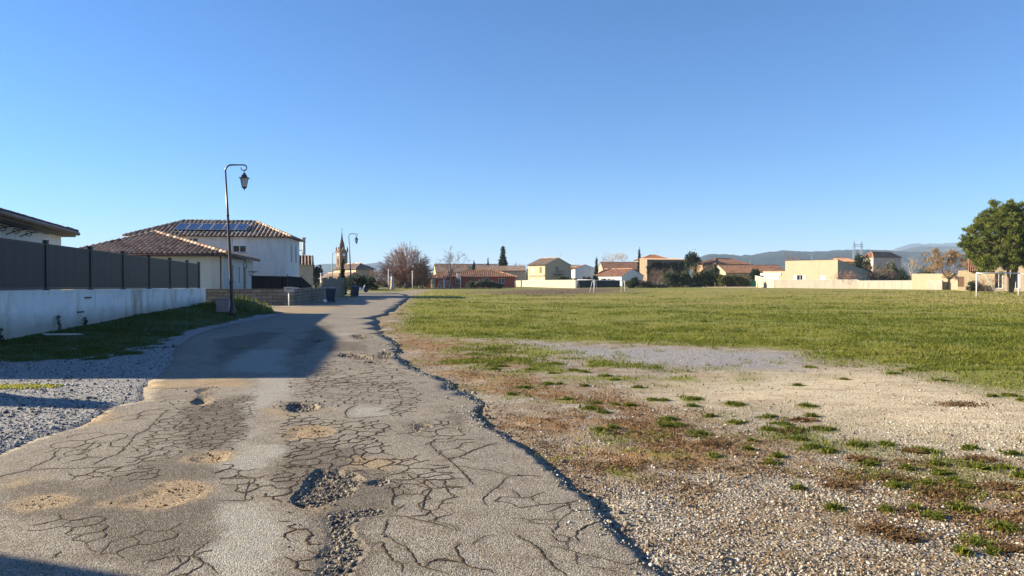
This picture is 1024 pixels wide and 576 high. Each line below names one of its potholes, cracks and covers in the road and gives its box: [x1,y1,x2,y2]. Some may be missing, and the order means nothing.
pothole [287,506,417,576]
crack [2,340,638,576]
pothole [338,352,375,360]
pothole [272,400,333,416]
pothole [284,462,402,514]
pothole [363,351,394,360]
pothole [172,387,224,407]
